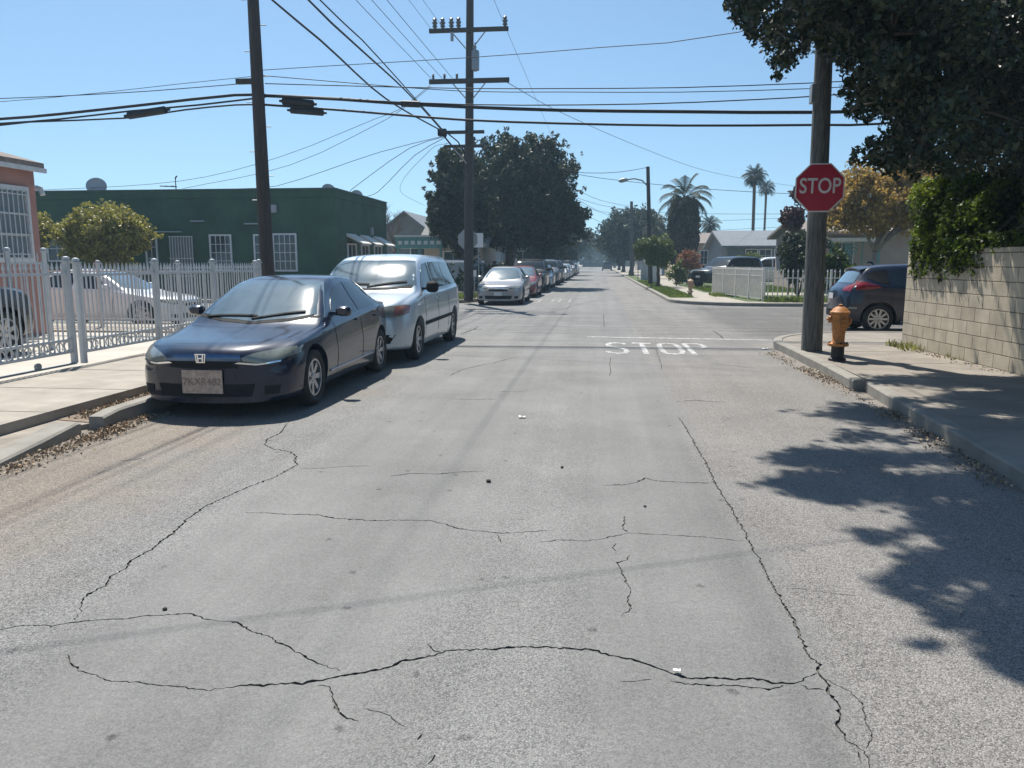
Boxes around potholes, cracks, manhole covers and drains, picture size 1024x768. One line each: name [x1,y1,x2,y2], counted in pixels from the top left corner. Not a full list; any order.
crack [0,419,873,768]
